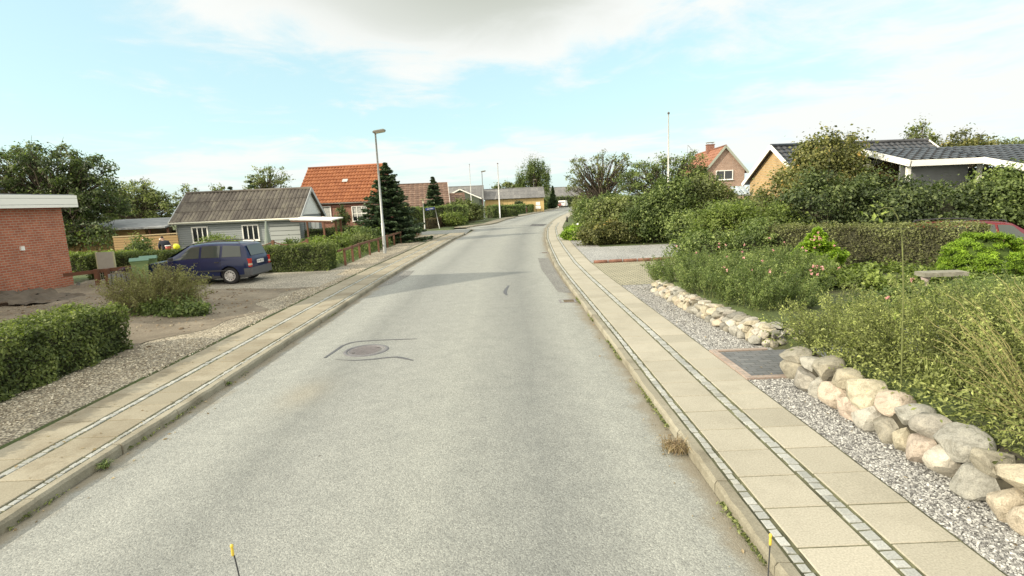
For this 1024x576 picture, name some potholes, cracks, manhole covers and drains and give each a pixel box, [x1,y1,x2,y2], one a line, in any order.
manhole cover [343,344,389,357]
